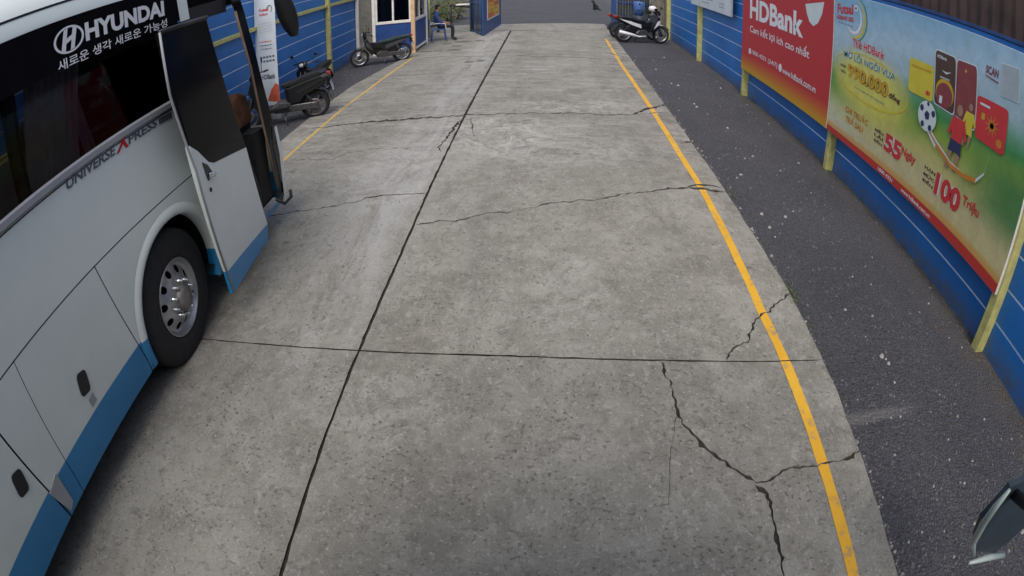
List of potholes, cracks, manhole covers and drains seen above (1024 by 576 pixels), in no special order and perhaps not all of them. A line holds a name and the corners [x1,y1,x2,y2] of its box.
crack [661,293,859,576]
crack [417,184,723,225]
crack [270,193,425,216]
crack [290,104,667,161]
